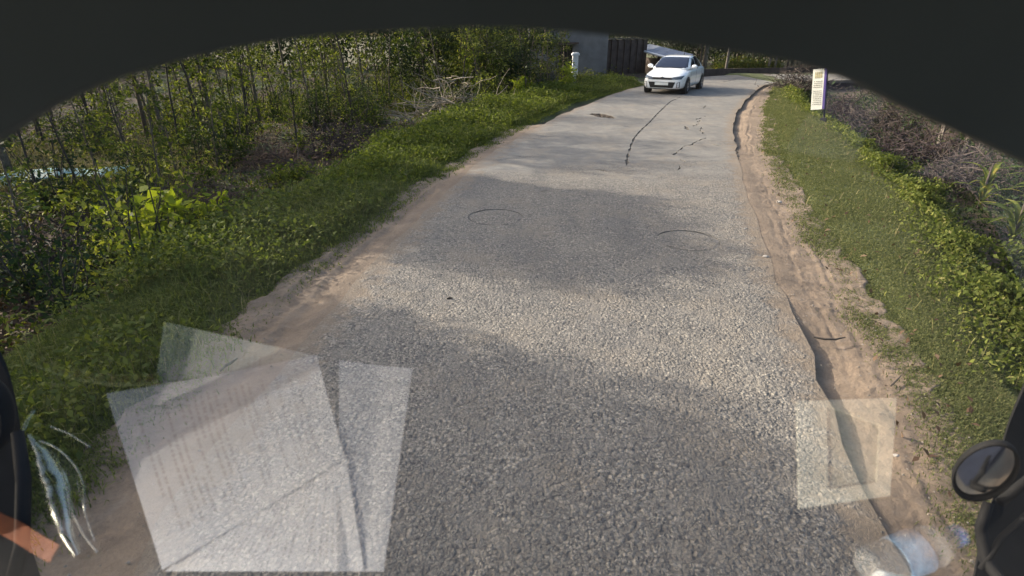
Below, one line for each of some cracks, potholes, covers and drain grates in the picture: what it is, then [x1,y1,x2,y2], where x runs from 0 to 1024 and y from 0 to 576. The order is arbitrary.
manhole cover [657,230,720,251]
crack [673,106,741,170]
manhole cover [468,209,522,225]
crack [625,97,680,165]
